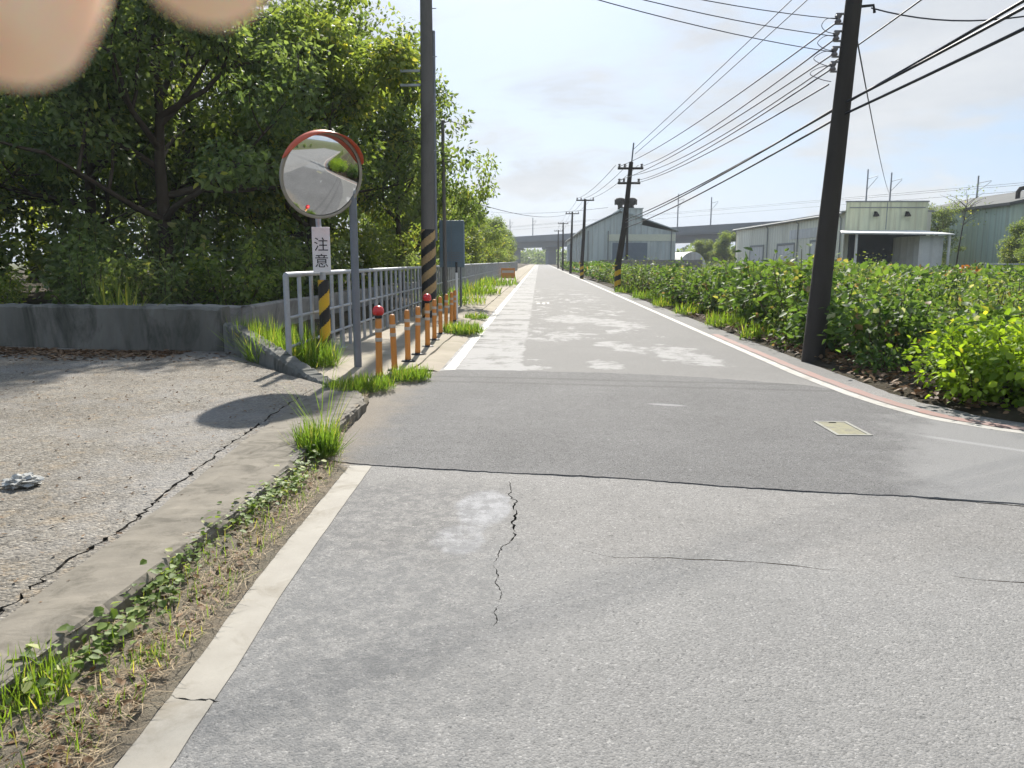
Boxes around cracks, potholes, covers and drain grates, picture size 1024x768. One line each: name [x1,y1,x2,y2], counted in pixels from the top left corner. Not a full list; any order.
crack [494,482,518,625]
crack [0,390,311,615]
crack [592,552,827,570]
utility cover [813,421,873,436]
